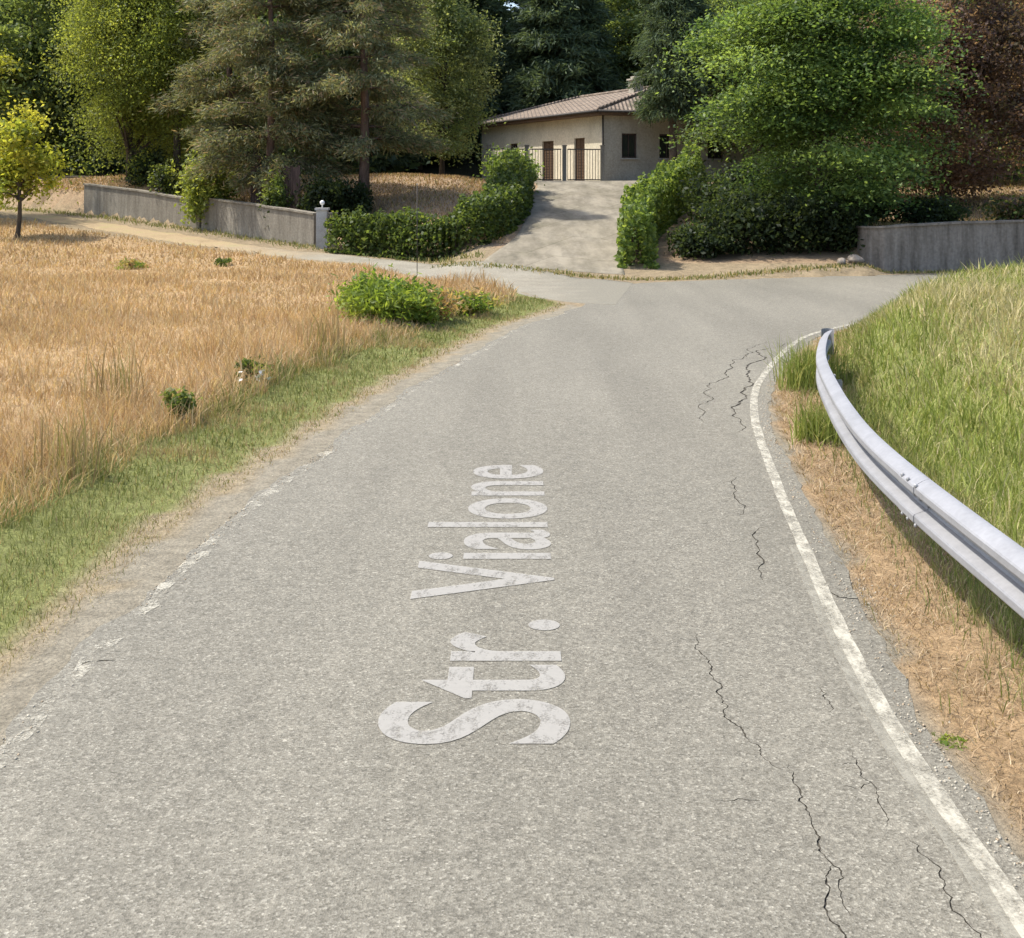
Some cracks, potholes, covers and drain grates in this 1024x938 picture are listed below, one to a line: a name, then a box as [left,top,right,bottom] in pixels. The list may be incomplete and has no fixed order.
crack [844,754,889,827]
crack [698,345,783,431]
crack [695,635,850,938]
crack [731,478,765,580]
crack [915,843,982,938]
